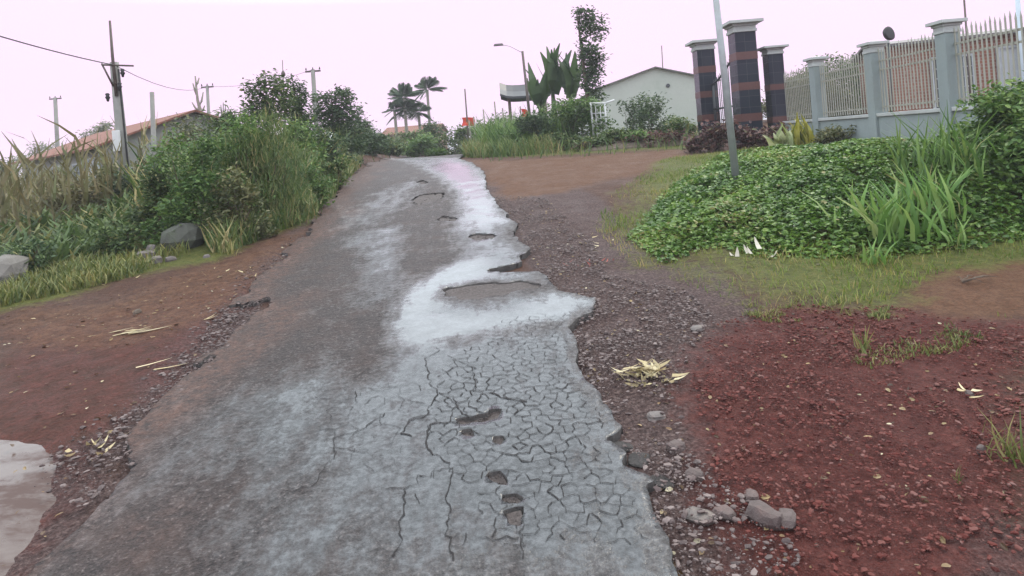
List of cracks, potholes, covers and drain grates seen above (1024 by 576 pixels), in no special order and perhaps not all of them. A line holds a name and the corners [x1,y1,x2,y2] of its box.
pothole [488,473,507,485]
pothole [413,194,443,205]
crack [284,321,651,560]
pothole [506,510,523,526]
pothole [457,411,501,424]
pothole [444,282,558,300]
